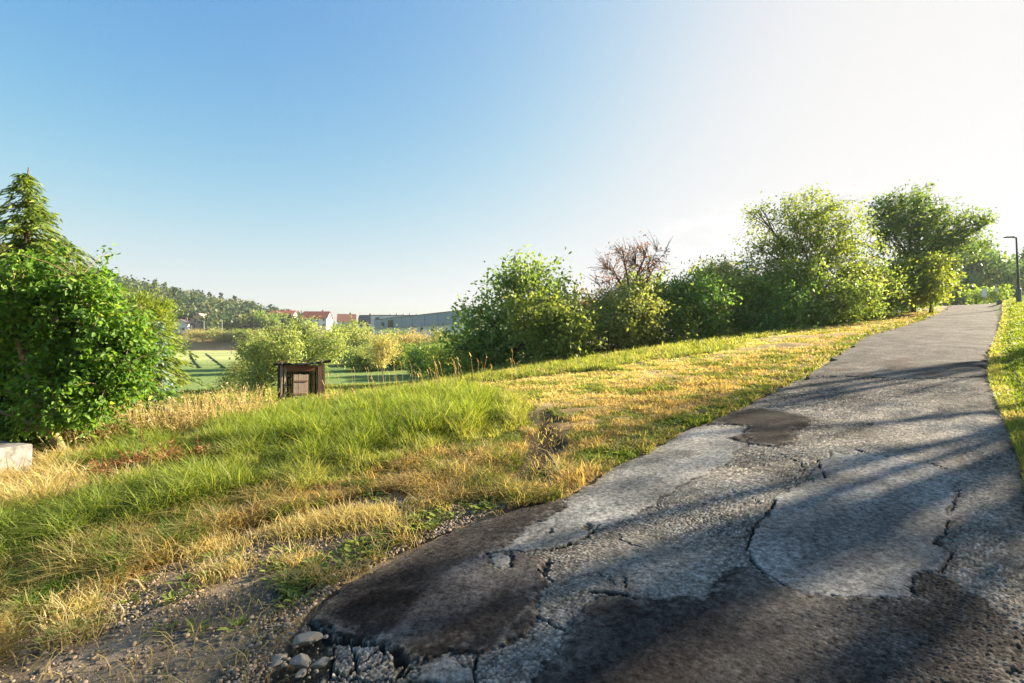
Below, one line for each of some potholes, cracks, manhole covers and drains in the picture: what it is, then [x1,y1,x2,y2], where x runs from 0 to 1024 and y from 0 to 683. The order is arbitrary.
crack [536,568,556,583]
crack [853,448,890,458]
crack [931,488,963,575]
crack [775,451,827,479]
crack [553,524,642,551]
crack [731,489,786,586]
crack [585,572,631,598]
